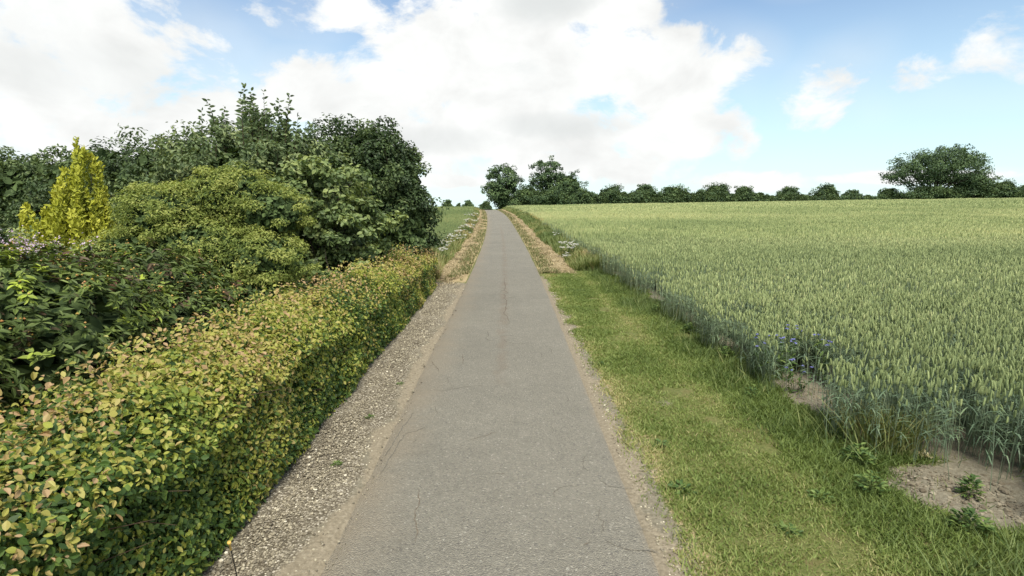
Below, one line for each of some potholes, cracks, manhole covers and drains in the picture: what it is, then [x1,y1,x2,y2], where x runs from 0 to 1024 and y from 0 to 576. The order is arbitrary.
crack [383,356,486,470]
crack [585,510,658,553]
